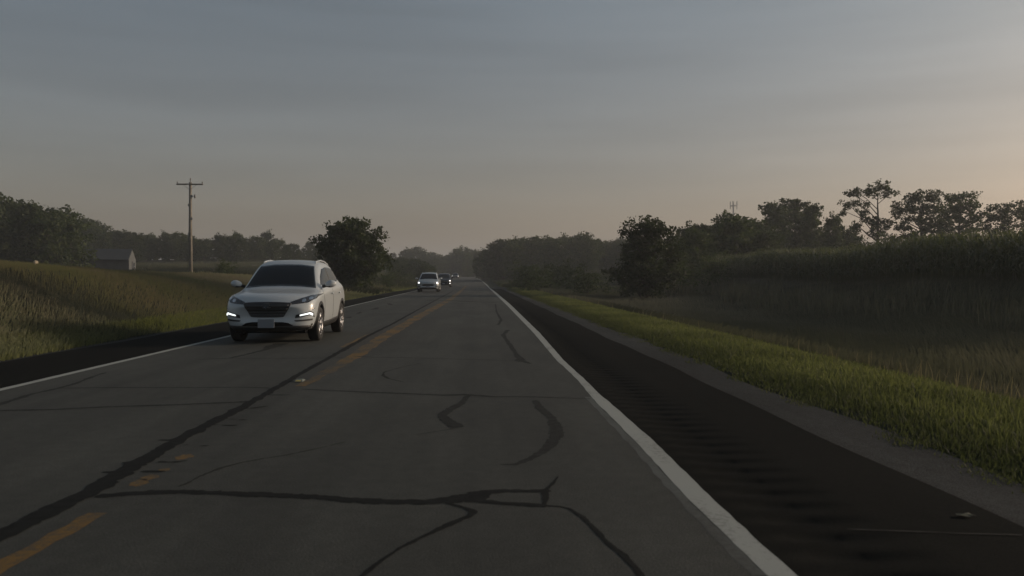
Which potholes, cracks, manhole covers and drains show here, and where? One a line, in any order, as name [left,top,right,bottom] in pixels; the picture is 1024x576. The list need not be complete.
crack [95,304,645,576]
crack [0,372,266,411]
